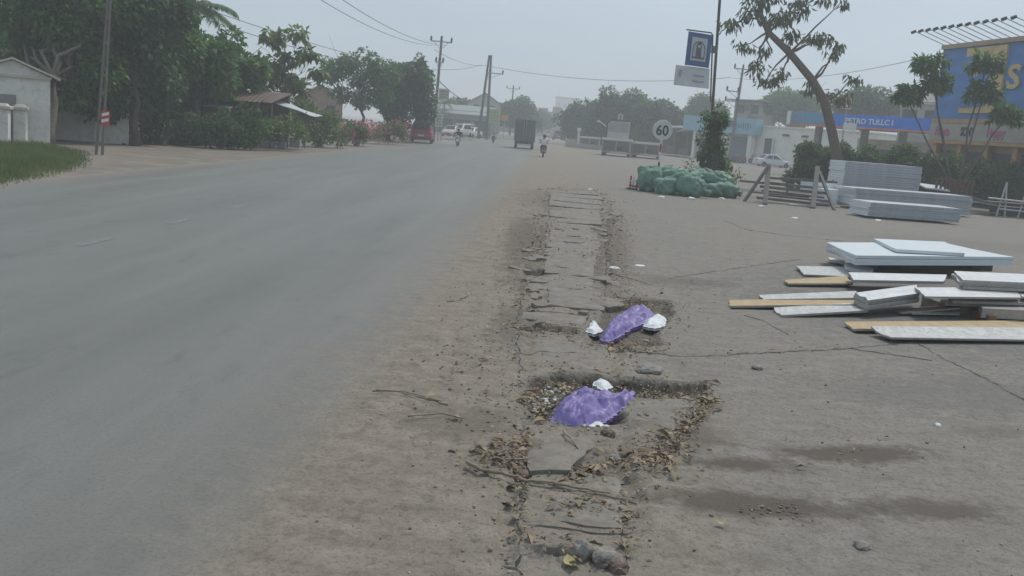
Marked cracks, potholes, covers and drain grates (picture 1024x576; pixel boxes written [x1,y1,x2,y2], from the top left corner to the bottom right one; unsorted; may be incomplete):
crack [632,315,1024,400]
crack [578,206,800,296]
crack [509,282,585,373]
crack [501,403,707,575]
crack [529,218,551,262]
pothole [577,296,680,353]
pothole [516,371,717,429]
crack [726,221,839,241]
